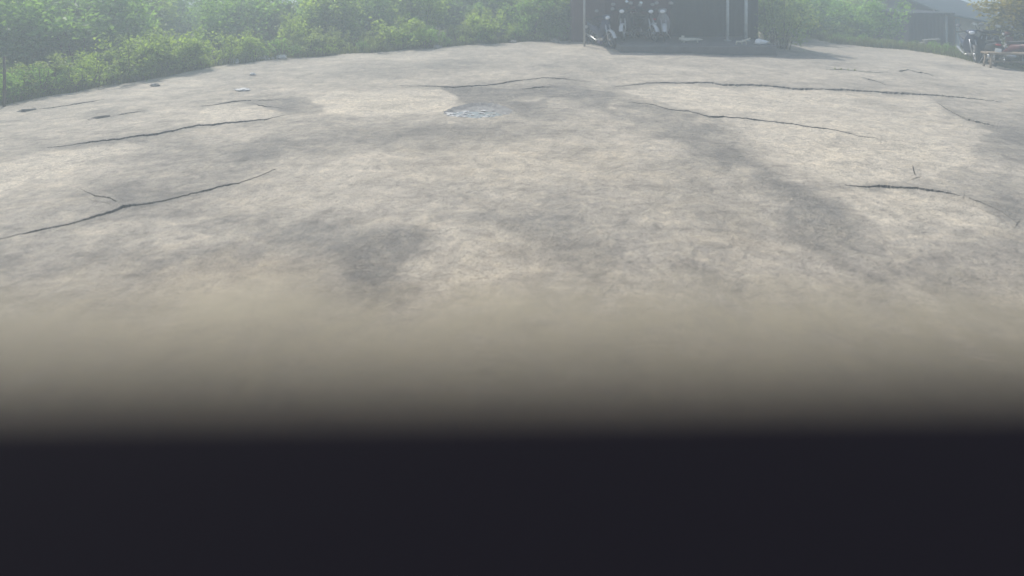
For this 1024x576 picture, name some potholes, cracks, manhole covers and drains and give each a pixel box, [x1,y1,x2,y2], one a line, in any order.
crack [842,162,1020,228]
crack [396,74,586,94]
crack [612,65,1002,145]
crack [0,95,289,244]
